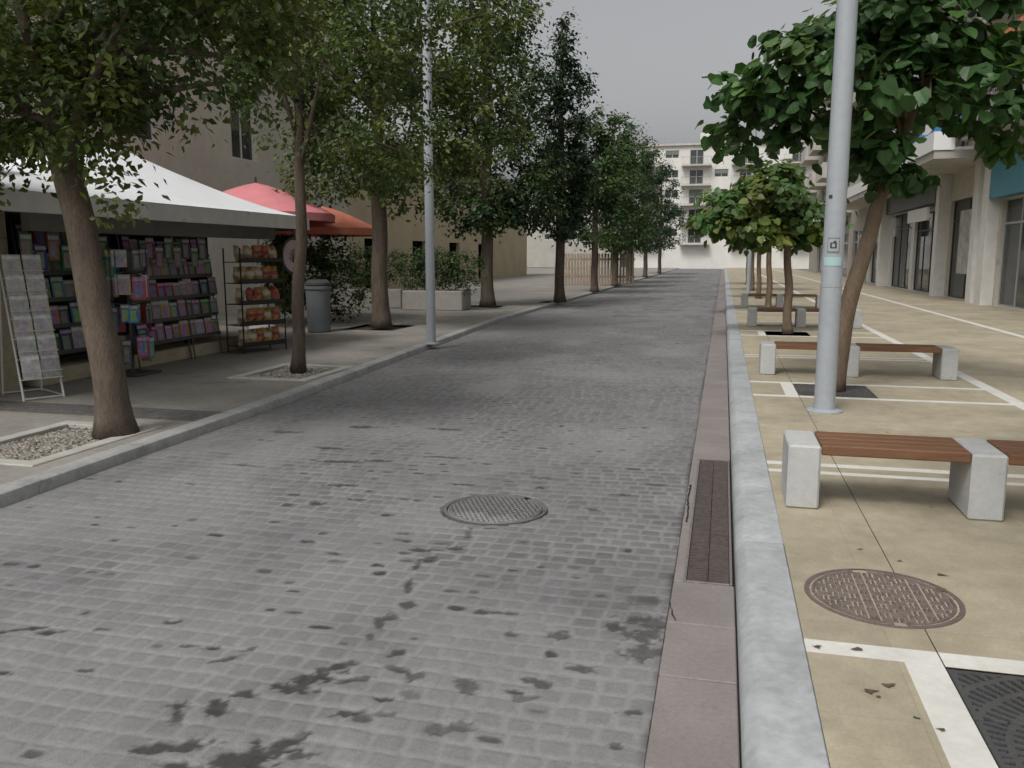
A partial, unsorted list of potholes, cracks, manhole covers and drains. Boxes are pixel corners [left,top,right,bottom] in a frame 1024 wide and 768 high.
manhole cover [804,568,966,629]
drain grate [683,459,733,587]
manhole cover [443,494,547,526]
